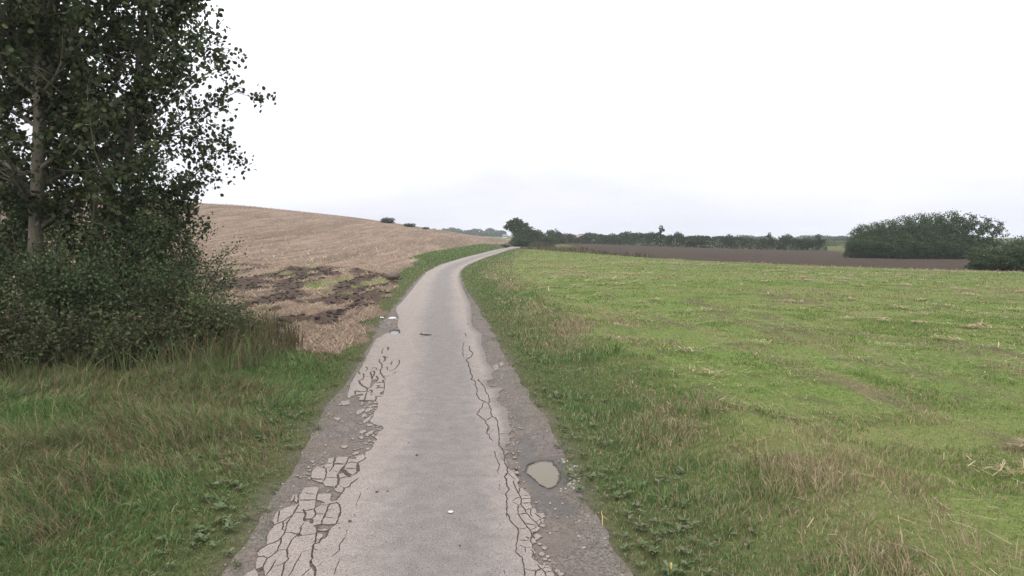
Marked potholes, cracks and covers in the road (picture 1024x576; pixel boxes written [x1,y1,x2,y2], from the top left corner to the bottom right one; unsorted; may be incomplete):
crack [462,324,553,576]
crack [256,457,366,576]
pothole [524,459,562,489]
crack [354,347,400,402]
